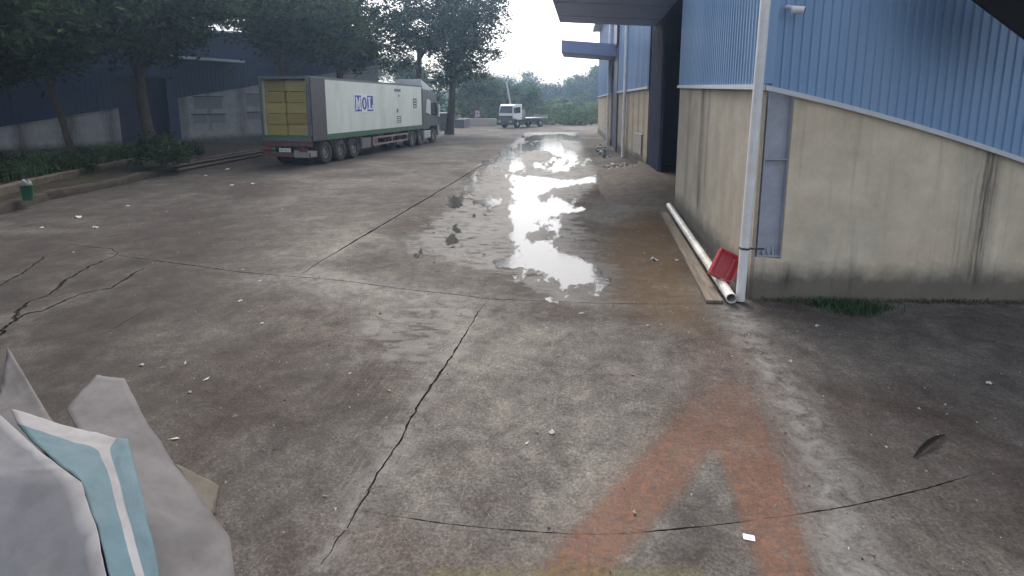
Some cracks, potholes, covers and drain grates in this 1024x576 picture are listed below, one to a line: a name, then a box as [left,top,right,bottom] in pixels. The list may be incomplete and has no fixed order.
crack [0,243,144,335]
